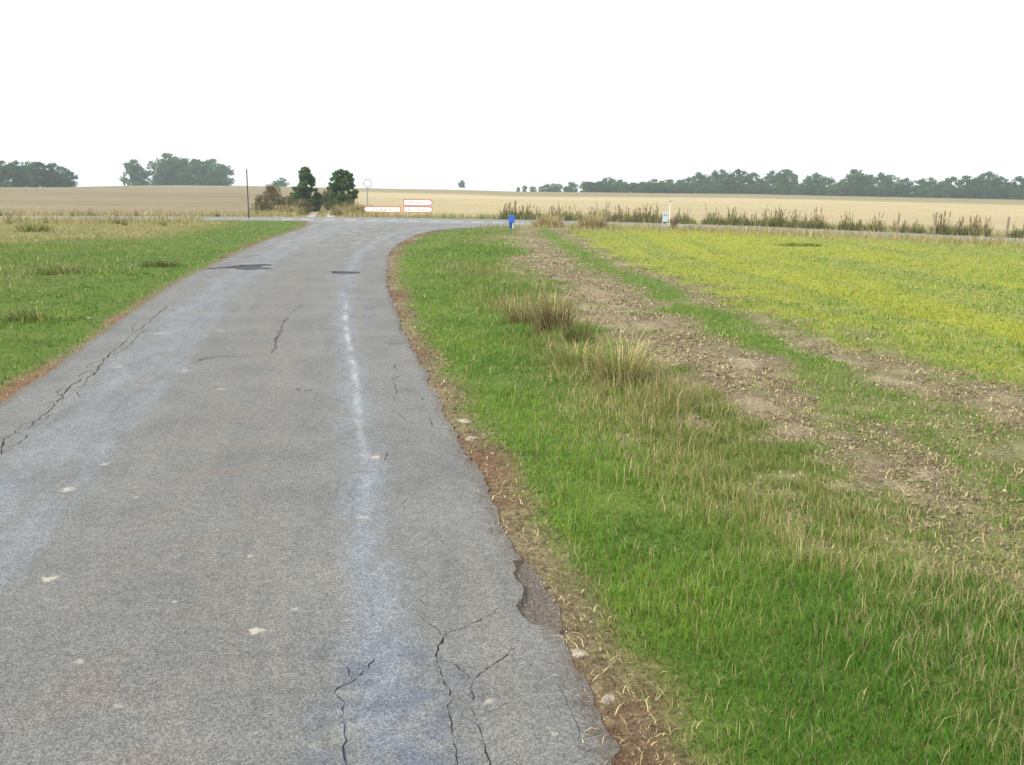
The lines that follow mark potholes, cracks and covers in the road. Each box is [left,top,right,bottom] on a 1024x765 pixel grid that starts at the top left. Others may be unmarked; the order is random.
crack [334,656,378,765]
crack [1,307,172,454]
crack [421,600,516,765]
crack [199,306,300,361]
pothole [513,560,567,634]
